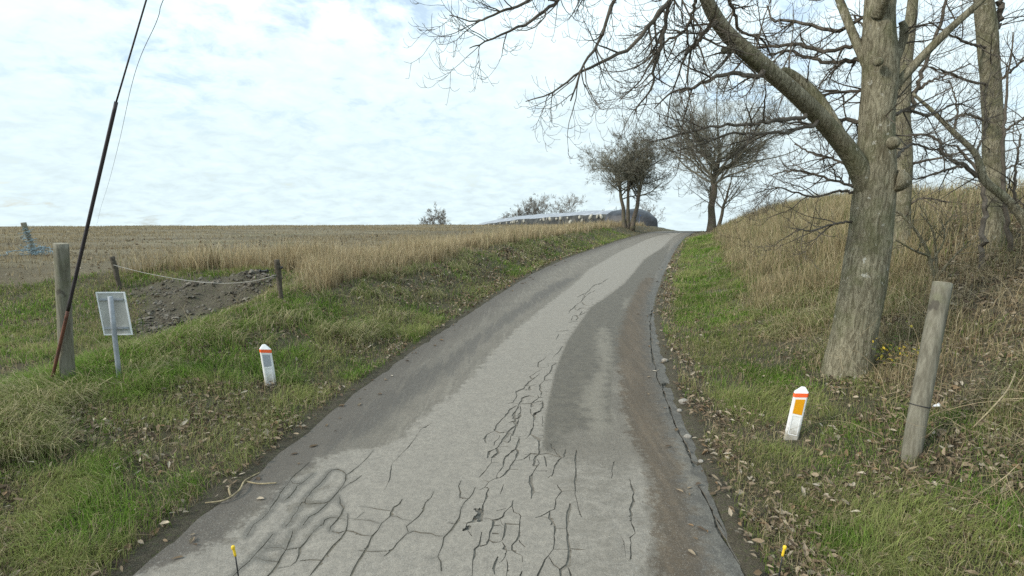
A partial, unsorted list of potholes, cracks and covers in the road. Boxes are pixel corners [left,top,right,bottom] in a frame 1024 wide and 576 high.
crack [675,476,738,561]
crack [233,346,584,576]
crack [649,310,692,459]
crack [556,279,607,339]
crack [611,461,635,562]
